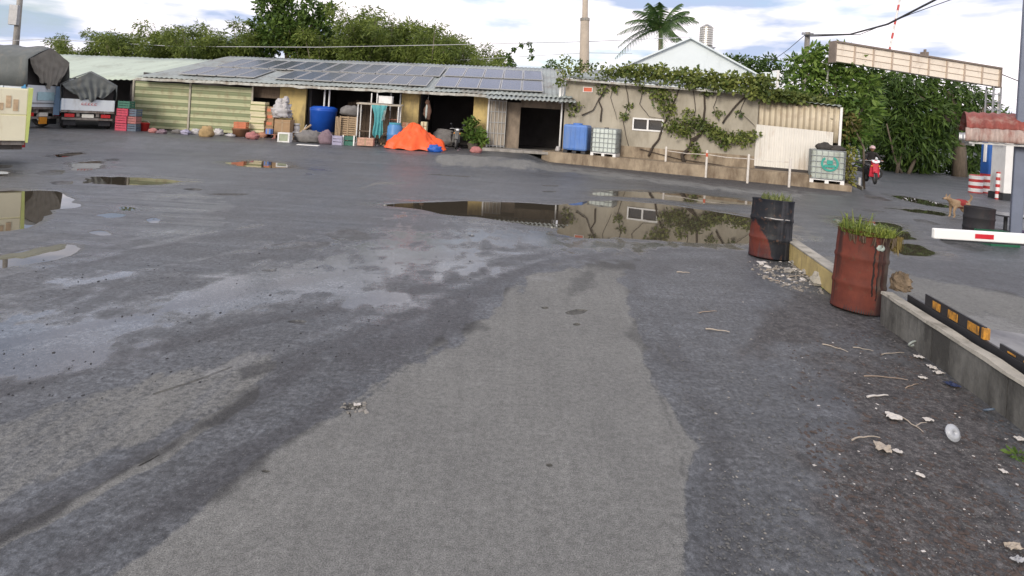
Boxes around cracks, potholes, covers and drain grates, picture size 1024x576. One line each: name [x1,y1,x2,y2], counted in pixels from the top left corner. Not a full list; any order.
crack [153,367,233,395]
